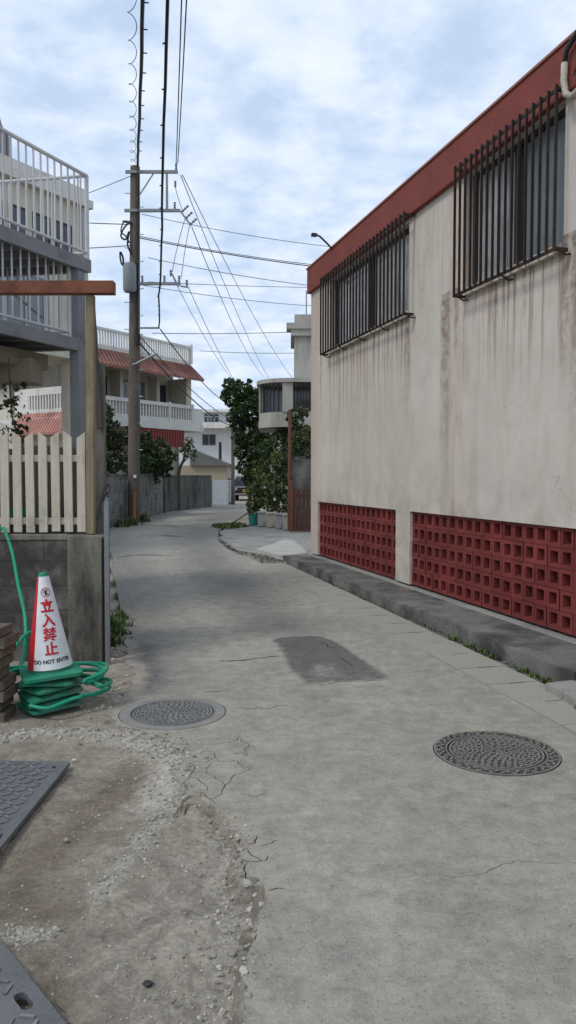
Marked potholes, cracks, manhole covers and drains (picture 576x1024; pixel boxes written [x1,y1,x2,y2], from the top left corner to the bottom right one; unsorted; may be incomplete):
manhole cover [119,697,225,730]
crack [183,737,262,804]
crack [401,861,571,878]
crack [241,836,277,879]
manhole cover [434,731,561,776]
pothole [54,794,267,1024]
